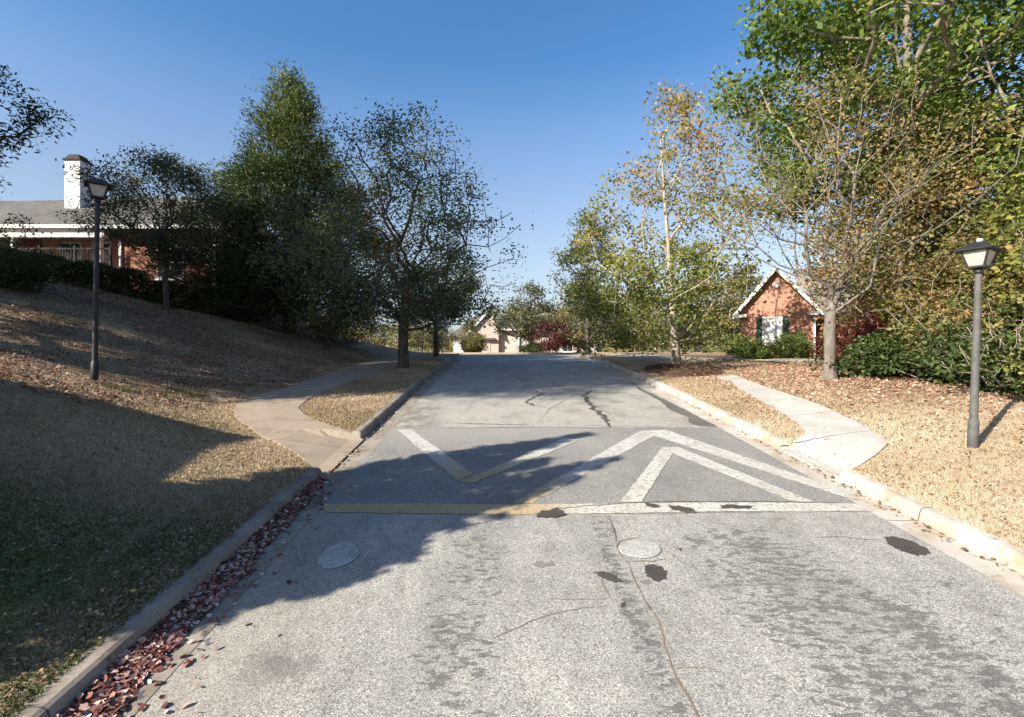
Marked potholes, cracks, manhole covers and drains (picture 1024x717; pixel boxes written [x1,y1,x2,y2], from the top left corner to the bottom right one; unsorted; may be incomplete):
pothole [644,564,667,581]
manhole cover [317,541,360,569]
pothole [669,505,696,513]
crack [561,501,808,717]
crack [525,386,618,427]
crack [496,580,611,637]
pothole [884,536,931,556]
pothole [536,507,567,518]
pothole [594,571,624,583]
manhole cover [618,540,661,558]
